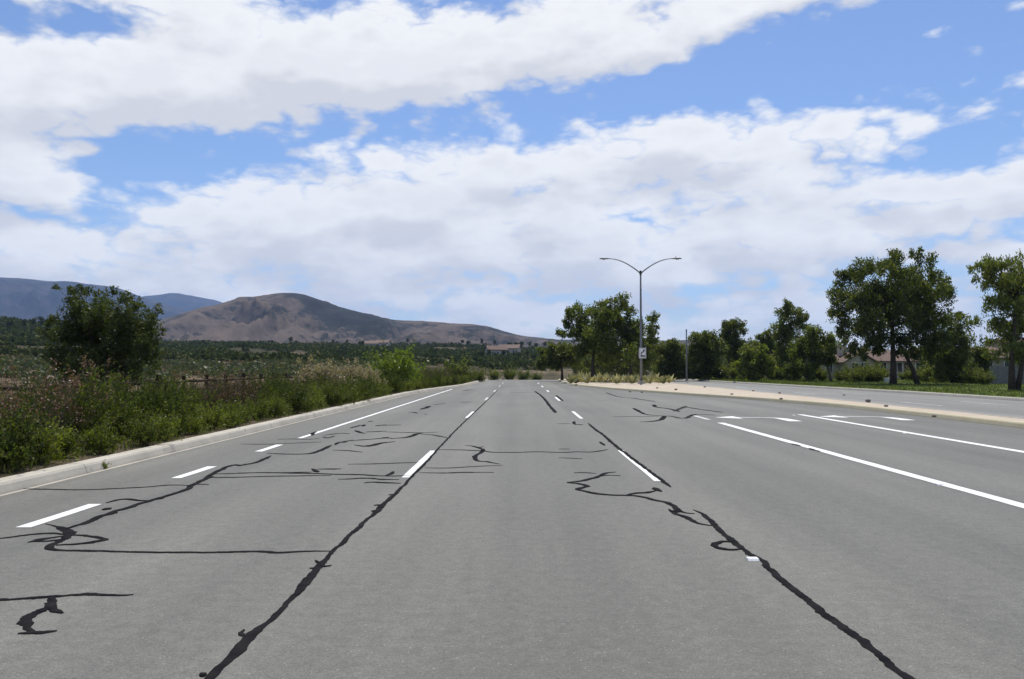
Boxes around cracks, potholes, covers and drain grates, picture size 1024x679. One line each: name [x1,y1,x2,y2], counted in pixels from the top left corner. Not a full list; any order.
crack [513,391,583,425]
crack [242,421,608,484]
crack [607,393,723,422]
